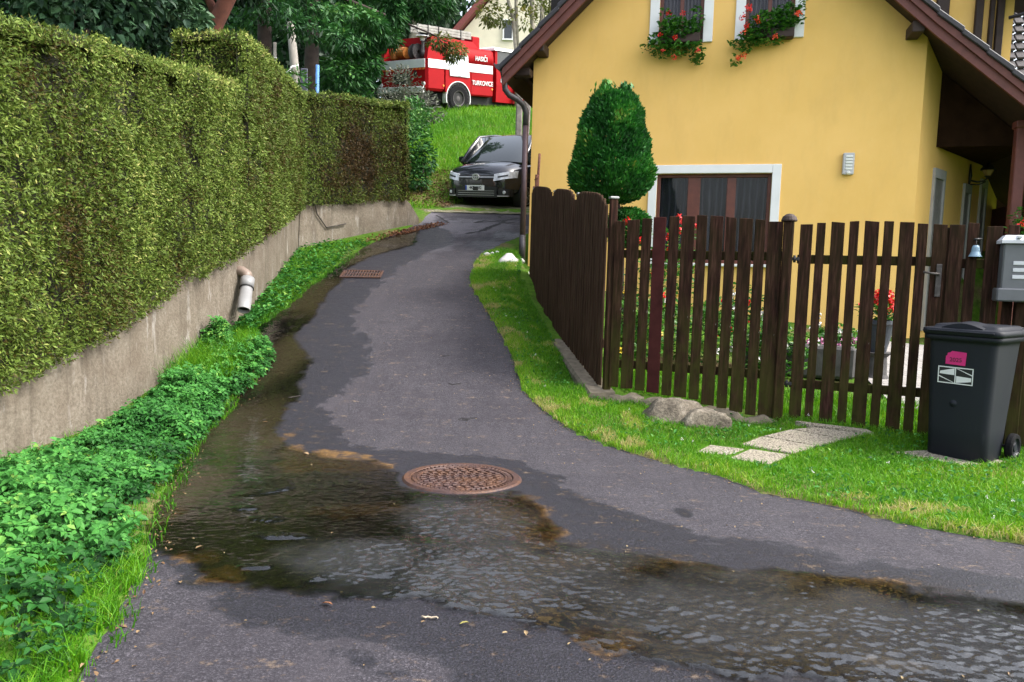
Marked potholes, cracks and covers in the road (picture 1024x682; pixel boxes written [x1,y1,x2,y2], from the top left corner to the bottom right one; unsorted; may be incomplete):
manhole cover [402,463,522,494]
